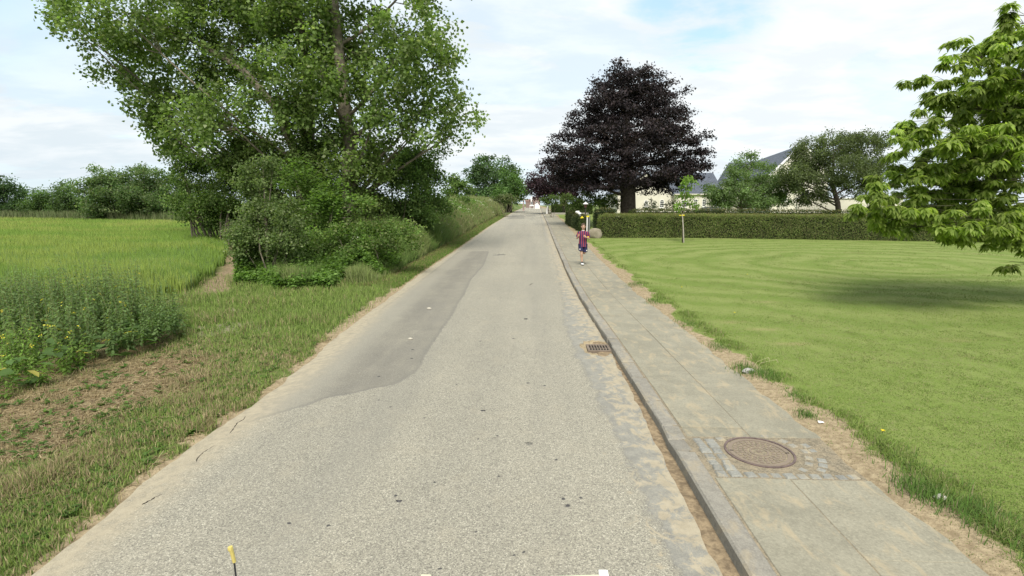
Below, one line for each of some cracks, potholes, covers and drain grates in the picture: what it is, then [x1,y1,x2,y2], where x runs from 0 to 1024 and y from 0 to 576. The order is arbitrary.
drain grate [586,344,611,353]
manhole cover [724,437,797,468]
